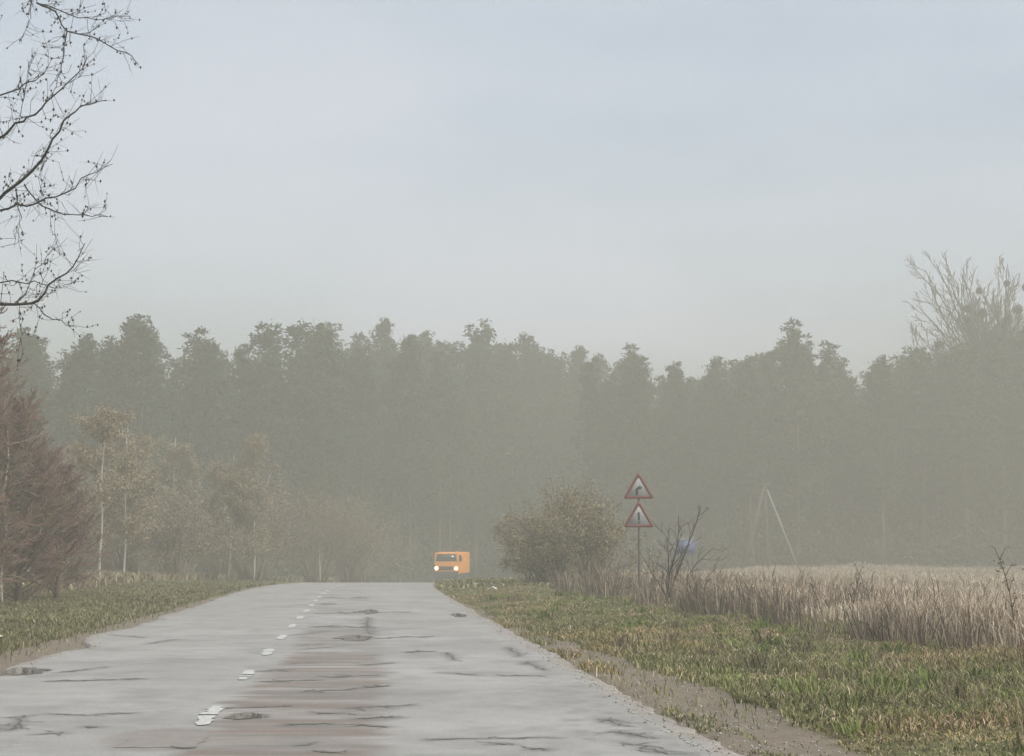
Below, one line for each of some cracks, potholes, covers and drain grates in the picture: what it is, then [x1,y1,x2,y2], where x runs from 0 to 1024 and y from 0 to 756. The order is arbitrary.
crack [598,717,701,755]
crack [2,713,114,735]
crack [427,736,554,751]
crack [221,597,478,728]
crack [497,647,545,676]
pothole [224,712,264,720]
pothole [0,667,51,675]
crack [56,667,140,681]
